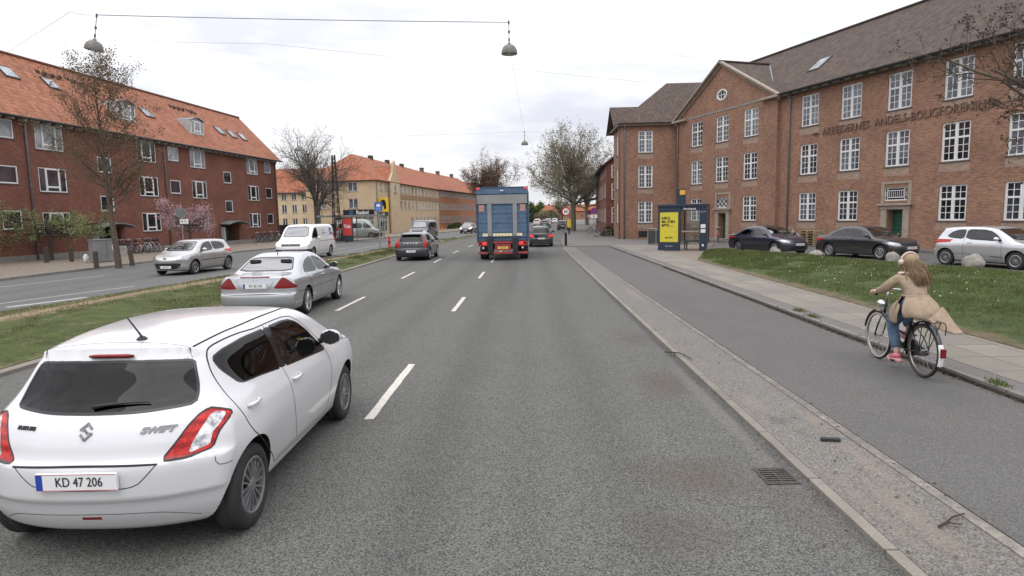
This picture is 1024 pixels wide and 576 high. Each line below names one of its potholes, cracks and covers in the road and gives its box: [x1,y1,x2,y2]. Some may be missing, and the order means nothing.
drain grate [753,467,801,485]
